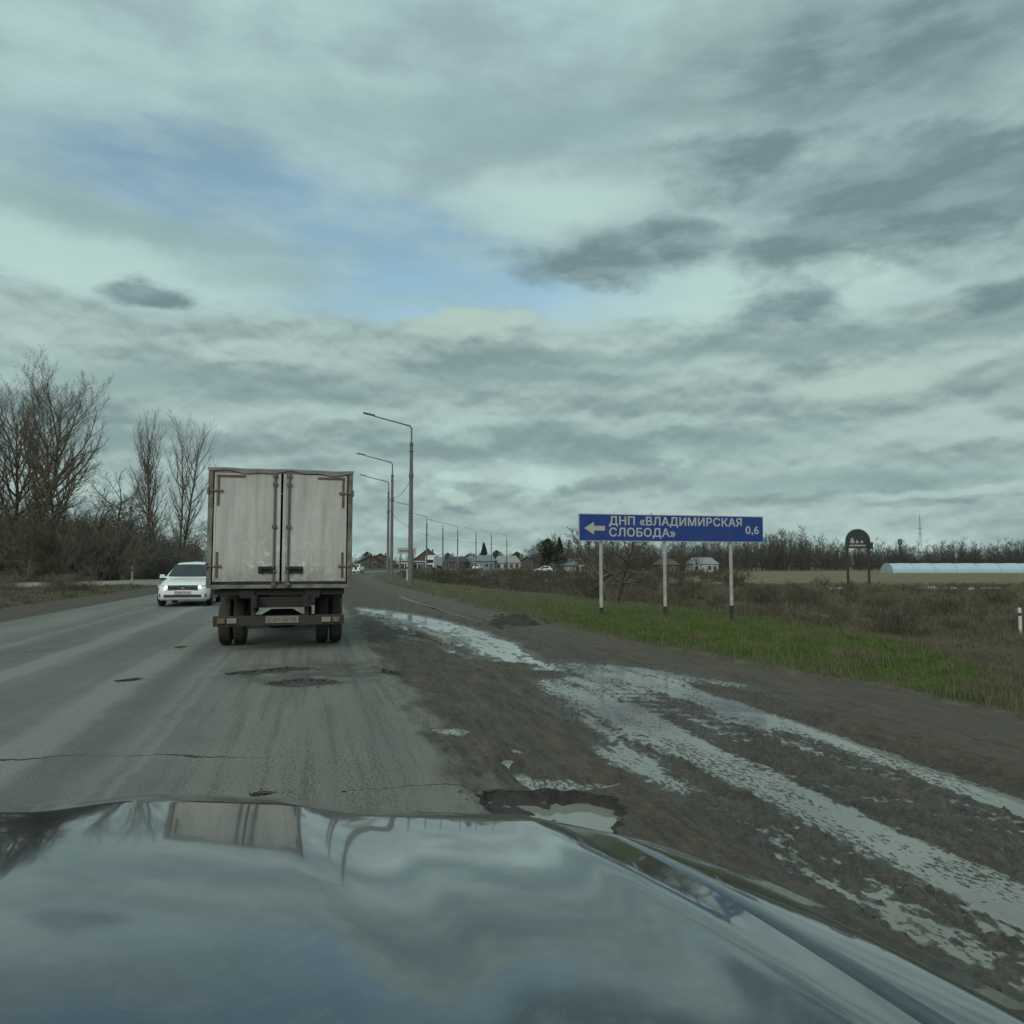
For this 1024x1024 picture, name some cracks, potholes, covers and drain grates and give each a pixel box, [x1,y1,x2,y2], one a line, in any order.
crack [0,753,269,763]
pothole [458,784,640,835]
pothole [240,788,291,797]
pothole [259,677,349,689]
crack [346,782,476,793]
pothole [369,668,409,679]
pothole [216,666,319,676]
